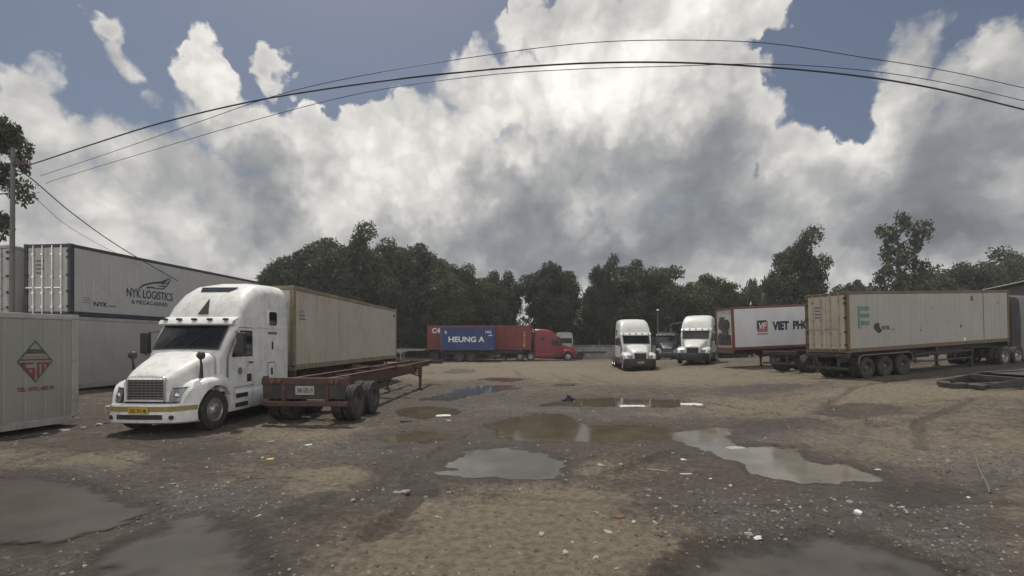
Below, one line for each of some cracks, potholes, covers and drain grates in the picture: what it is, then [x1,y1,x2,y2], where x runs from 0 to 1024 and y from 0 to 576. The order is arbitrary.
pothole [0,471,167,551]
pothole [392,405,466,419]
pothole [534,397,692,408]
pothole [670,426,891,485]
pothole [477,411,678,445]
pothole [431,446,578,482]
